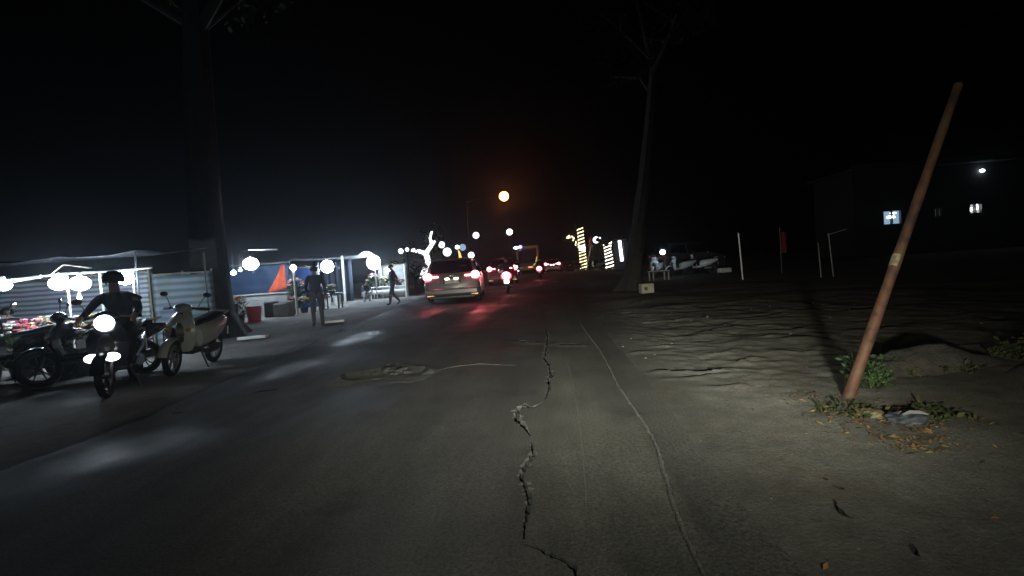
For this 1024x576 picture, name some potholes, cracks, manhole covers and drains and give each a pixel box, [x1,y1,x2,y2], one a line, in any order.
crack [511,327,580,576]
pothole [326,362,434,389]
